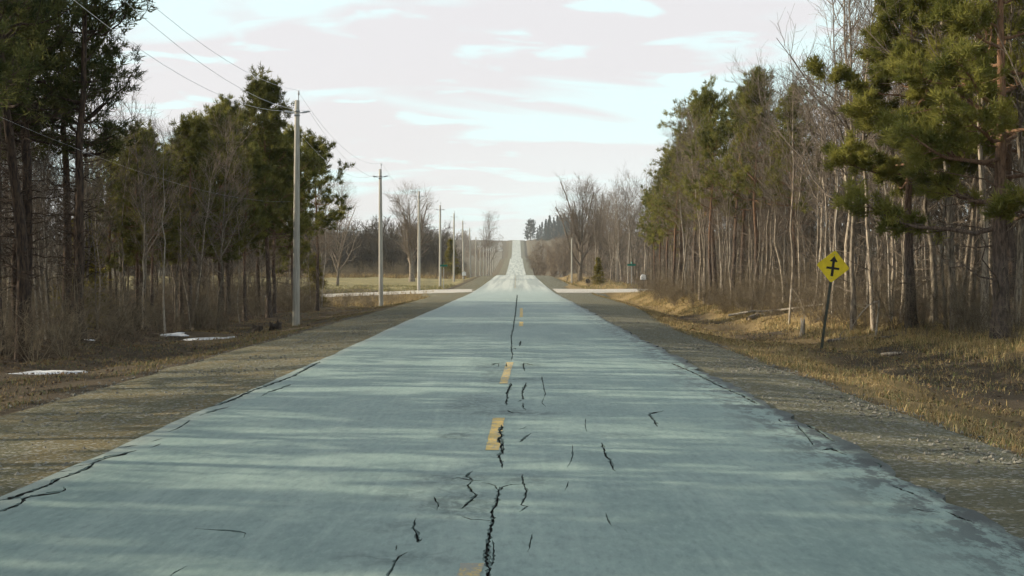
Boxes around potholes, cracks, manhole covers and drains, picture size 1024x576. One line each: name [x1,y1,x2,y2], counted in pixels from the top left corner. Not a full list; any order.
crack [893,486,973,522]
crack [453,295,546,576]
crack [672,363,757,404]
crack [386,497,439,576]
crack [778,419,846,455]
crack [0,362,321,512]
crack [565,419,615,490]
